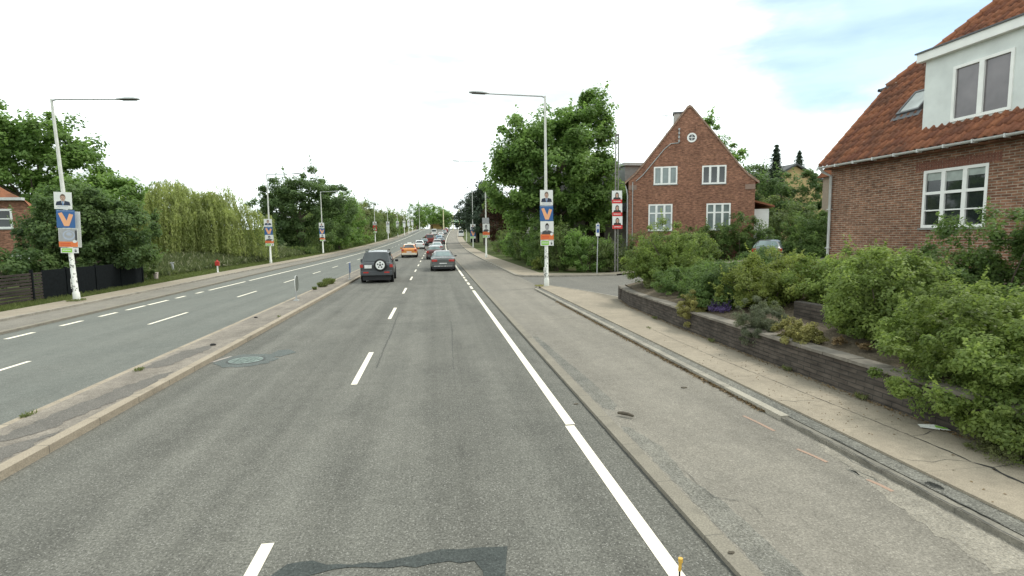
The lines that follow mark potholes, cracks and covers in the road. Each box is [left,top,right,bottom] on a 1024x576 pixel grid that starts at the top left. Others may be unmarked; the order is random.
pothole [922,481,946,491]
